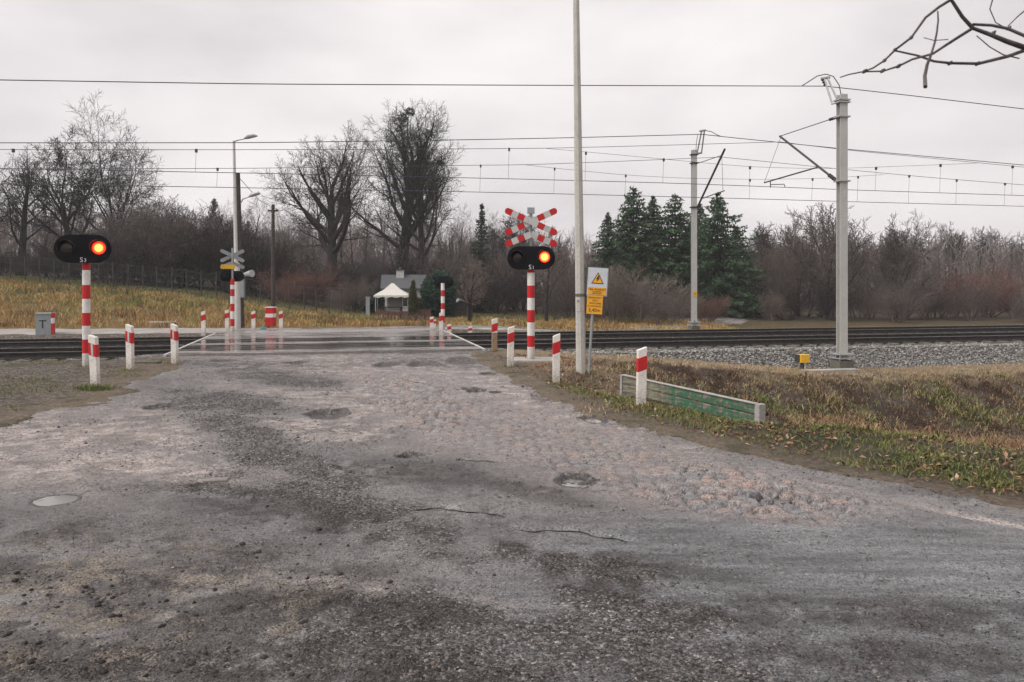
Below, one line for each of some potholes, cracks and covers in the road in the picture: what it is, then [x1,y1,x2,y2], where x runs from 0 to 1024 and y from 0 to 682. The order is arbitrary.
pothole [300,408,352,420]
pothole [553,472,602,489]
crack [421,508,628,542]
